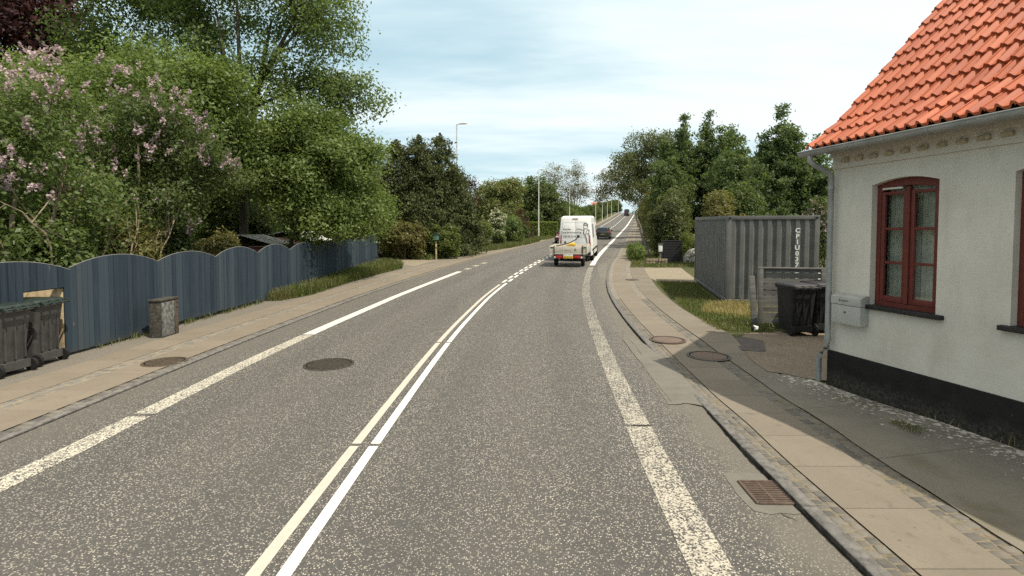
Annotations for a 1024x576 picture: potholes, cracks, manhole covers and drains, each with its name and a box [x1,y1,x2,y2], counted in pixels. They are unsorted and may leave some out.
manhole cover [686,351,731,362]
manhole cover [649,336,686,345]
drain grate [737,480,796,505]
manhole cover [140,357,188,368]
manhole cover [303,358,355,371]
